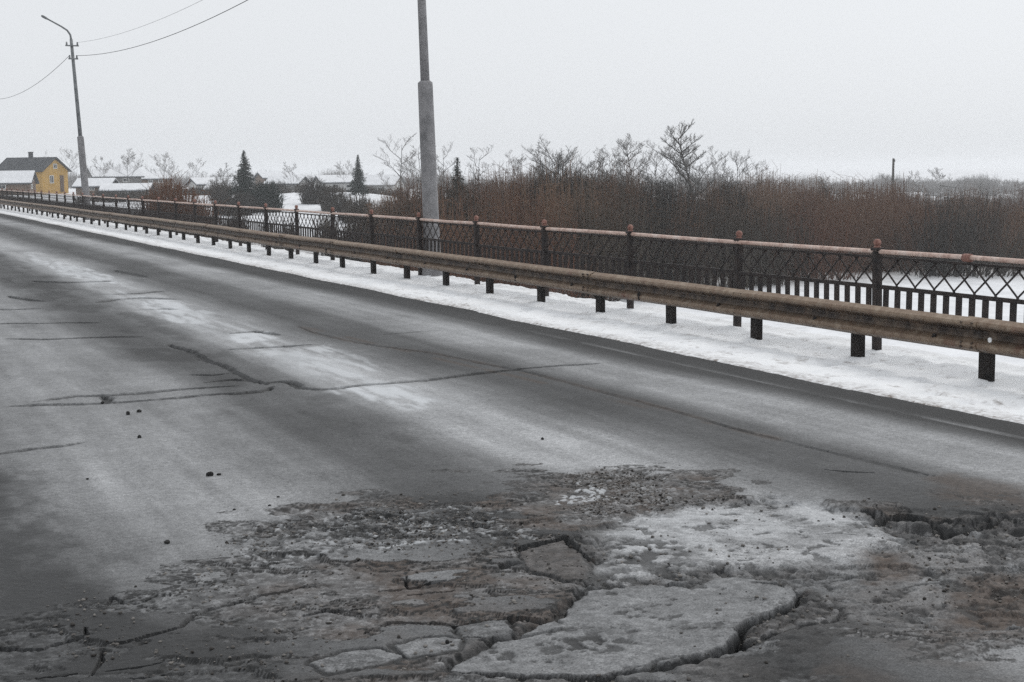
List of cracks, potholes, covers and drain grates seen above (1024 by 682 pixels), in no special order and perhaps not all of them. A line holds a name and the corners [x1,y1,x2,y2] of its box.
pothole [556,470,724,524]
crack [9,331,599,407]
crack [0,534,594,680]
crack [0,441,85,454]
pothole [440,499,1024,682]
crack [0,270,177,340]
